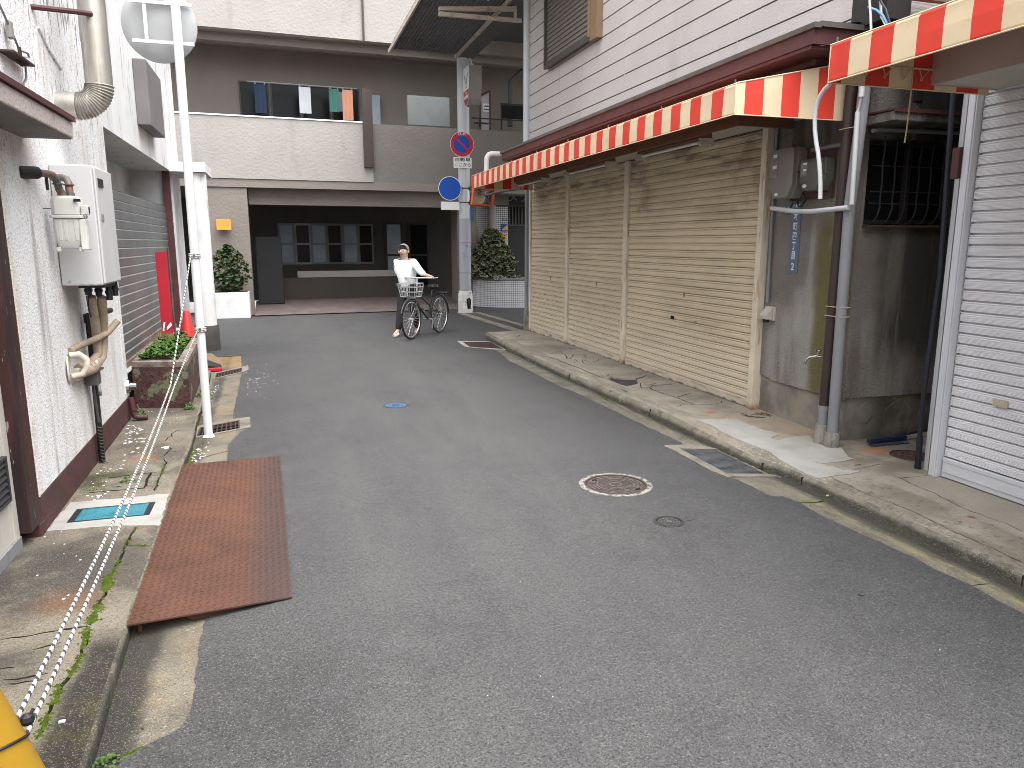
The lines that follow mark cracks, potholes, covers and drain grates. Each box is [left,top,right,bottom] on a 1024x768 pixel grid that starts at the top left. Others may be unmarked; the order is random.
manhole cover [579,473,653,497]
manhole cover [889,450,925,462]
crack [534,349,613,378]
utility cover [654,516,685,527]
crack [89,430,178,493]
drain grate [681,449,765,474]
drain grate [215,368,242,378]
